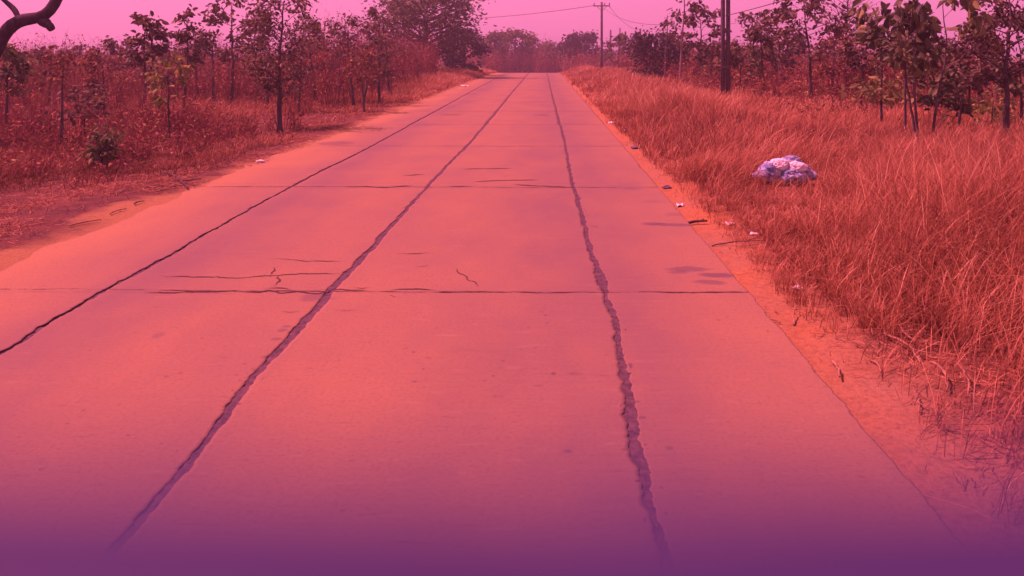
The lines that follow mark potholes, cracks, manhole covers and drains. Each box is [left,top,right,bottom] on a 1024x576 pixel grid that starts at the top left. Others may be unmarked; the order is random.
crack [0,73,660,484]
